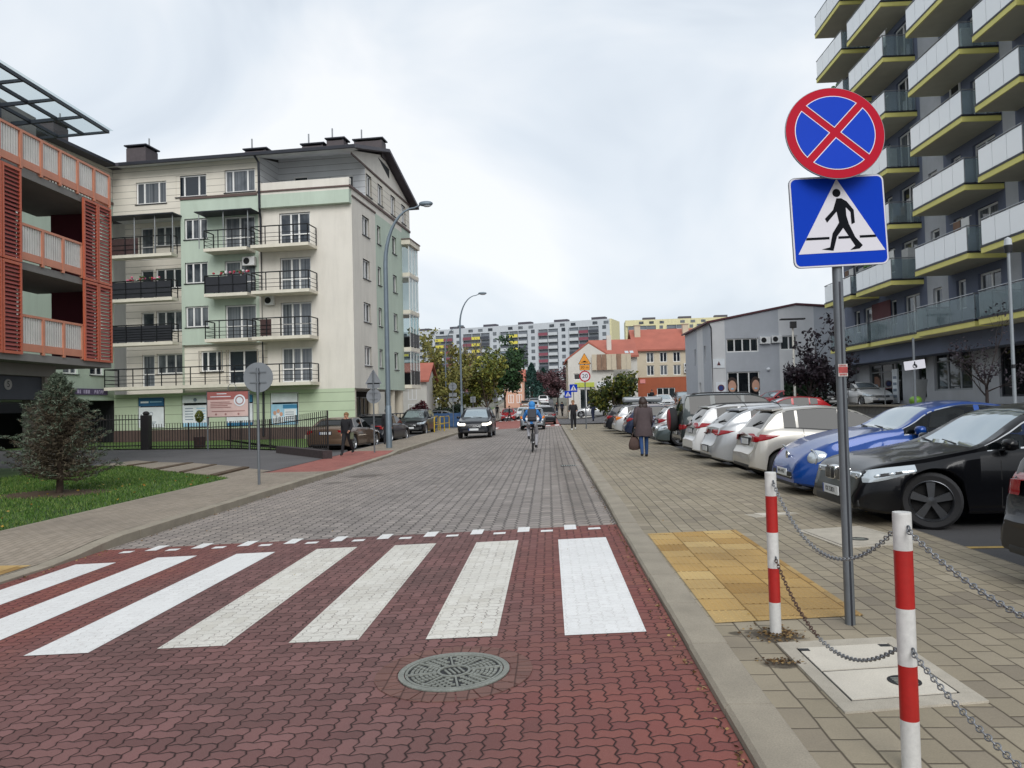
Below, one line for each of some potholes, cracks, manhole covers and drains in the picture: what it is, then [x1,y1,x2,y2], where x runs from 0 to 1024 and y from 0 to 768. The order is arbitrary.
manhole cover [776,636,989,714]
manhole cover [374,646,533,703]
manhole cover [799,526,919,548]
